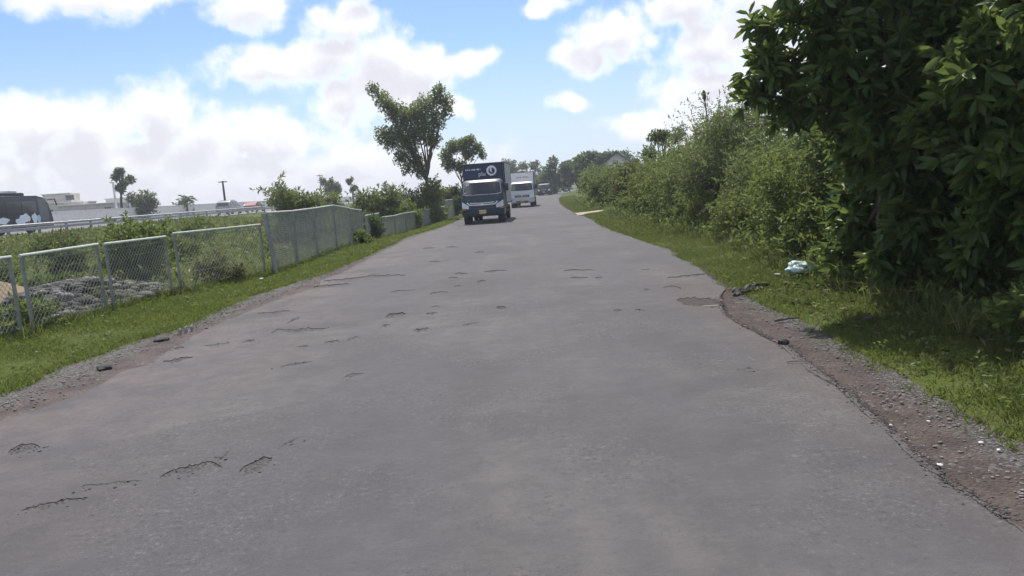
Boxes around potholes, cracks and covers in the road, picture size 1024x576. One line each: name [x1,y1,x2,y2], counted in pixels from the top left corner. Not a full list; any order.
pothole [239,457,272,474]
pothole [8,443,40,455]
pothole [677,297,725,308]
